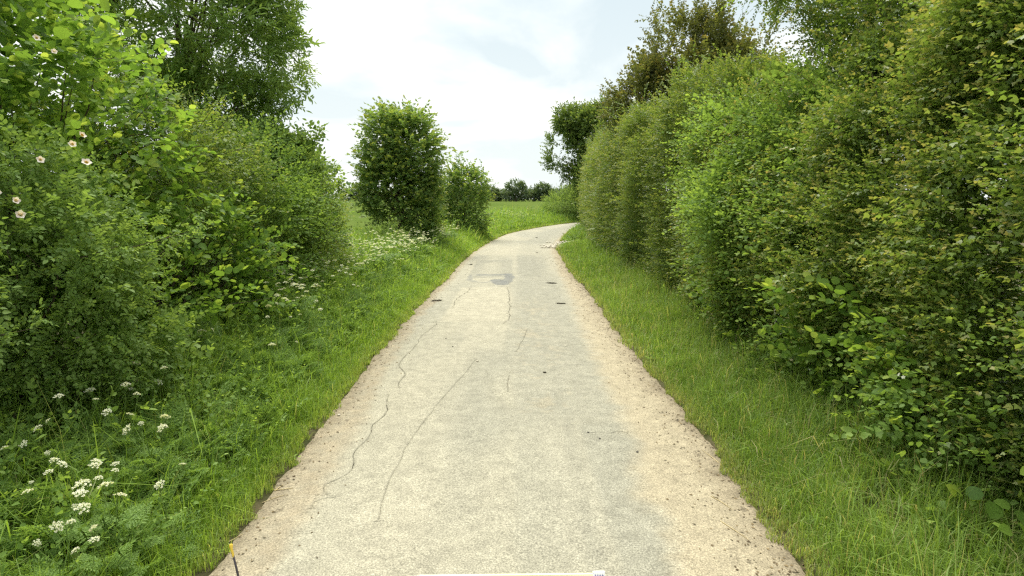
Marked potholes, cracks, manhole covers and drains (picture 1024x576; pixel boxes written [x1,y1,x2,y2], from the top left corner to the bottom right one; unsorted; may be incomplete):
crack [305,286,474,509]
crack [504,375,513,392]
crack [501,286,530,352]
